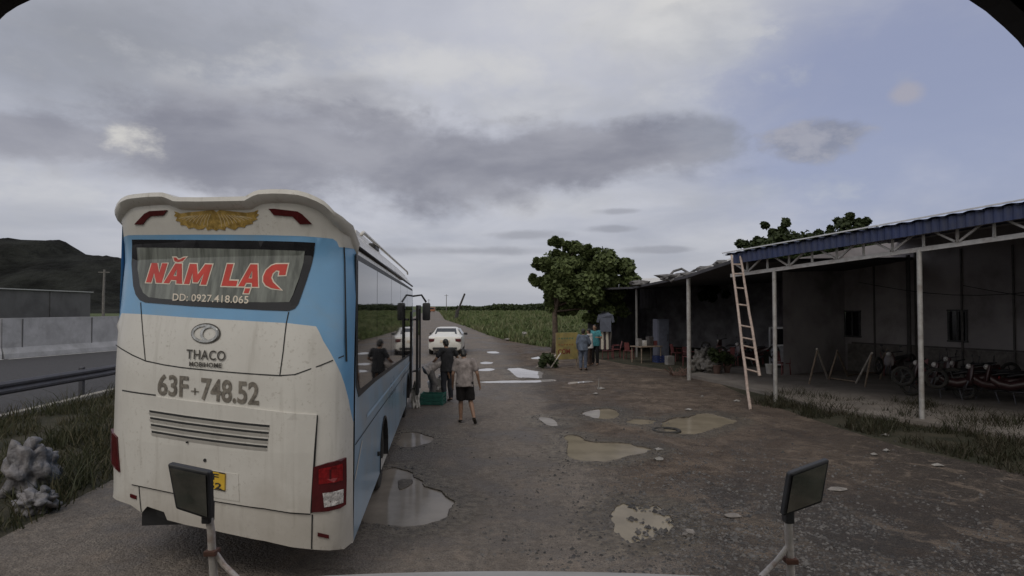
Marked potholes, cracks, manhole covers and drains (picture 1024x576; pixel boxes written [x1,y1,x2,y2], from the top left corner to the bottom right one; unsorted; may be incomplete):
pothole [611,503,674,543]
pothole [396,432,434,447]
pothole [581,408,619,419]
pothole [539,417,558,426]
pothole [362,467,455,527]
pothole [564,434,653,461]
pothole [661,413,738,434]
